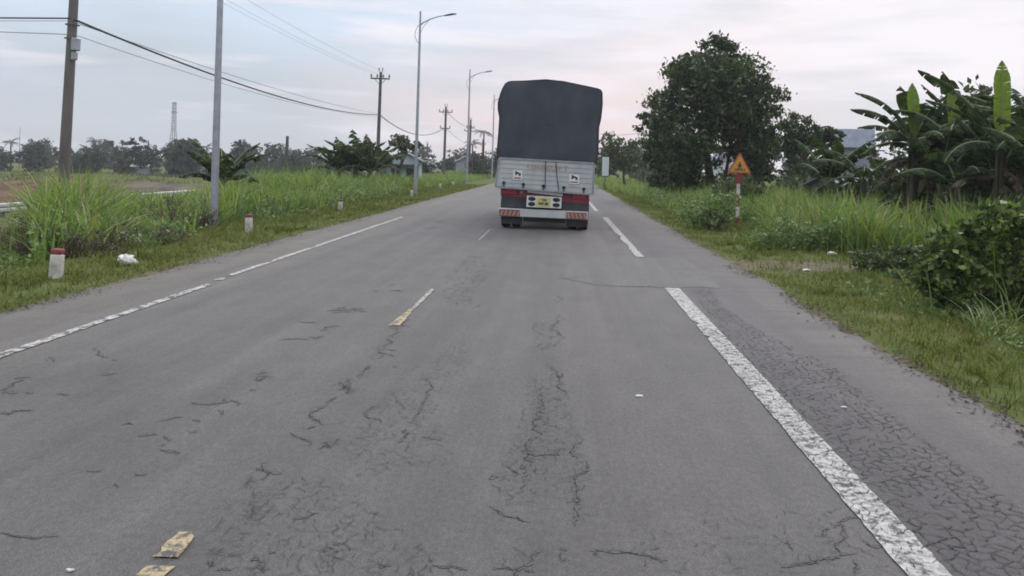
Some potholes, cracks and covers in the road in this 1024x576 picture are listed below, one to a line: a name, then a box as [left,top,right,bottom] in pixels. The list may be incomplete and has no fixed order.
crack [241,462,282,483]
crack [291,318,468,474]
crack [122,371,271,454]
crack [152,477,468,576]
crack [0,347,118,415]
crack [0,532,58,542]
crack [493,288,1024,576]
crack [281,306,366,341]
